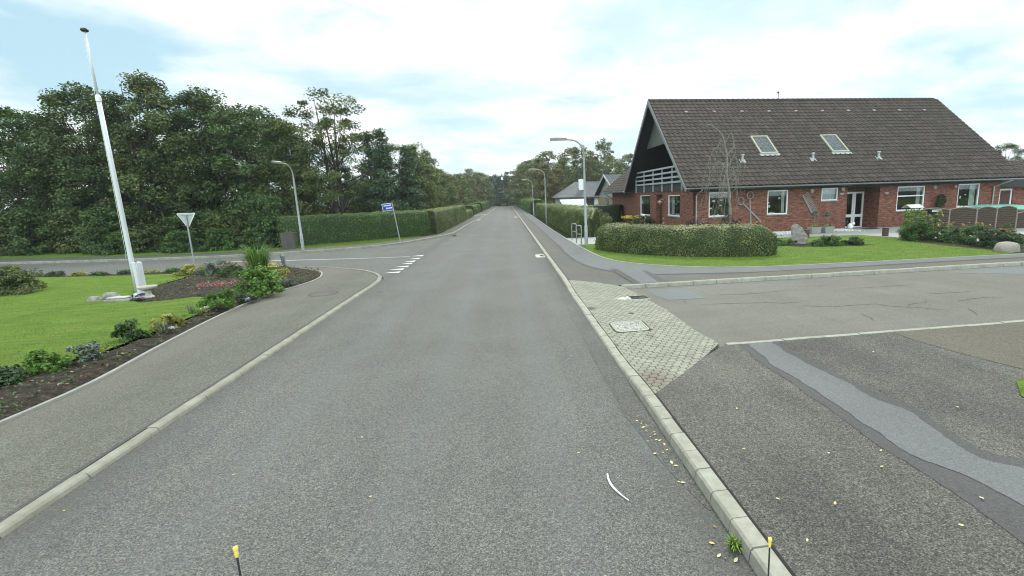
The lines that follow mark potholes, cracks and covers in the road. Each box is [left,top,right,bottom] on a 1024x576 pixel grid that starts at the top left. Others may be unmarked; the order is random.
manhole cover [609,321,650,333]
crack [706,284,1007,320]
